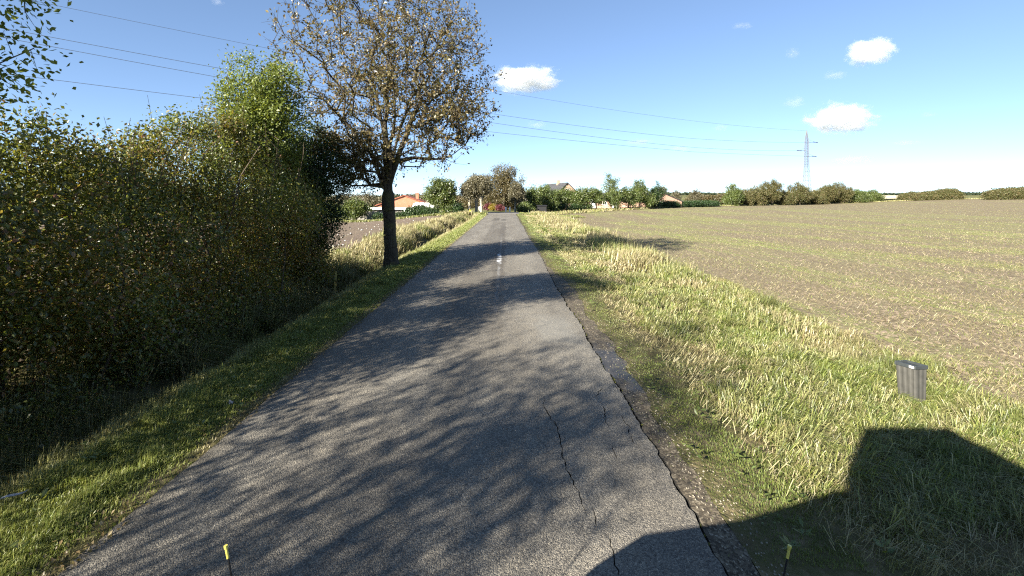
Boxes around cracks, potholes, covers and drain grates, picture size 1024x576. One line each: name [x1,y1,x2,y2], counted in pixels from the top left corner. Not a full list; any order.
crack [538,253,729,576]
